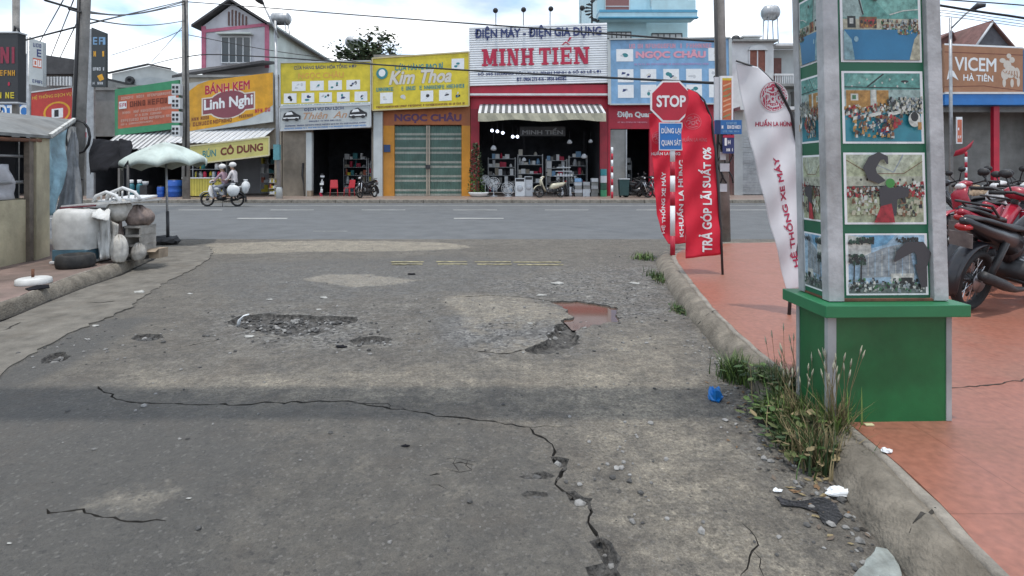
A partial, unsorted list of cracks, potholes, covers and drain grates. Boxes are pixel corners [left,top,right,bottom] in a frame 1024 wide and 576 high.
crack [952,379,1024,388]
crack [46,508,165,523]
crack [97,386,603,545]
pothole [349,336,392,345]
pothole [41,352,71,364]
pothole [524,301,621,354]
crack [741,524,764,576]
pothole [227,313,358,336]
